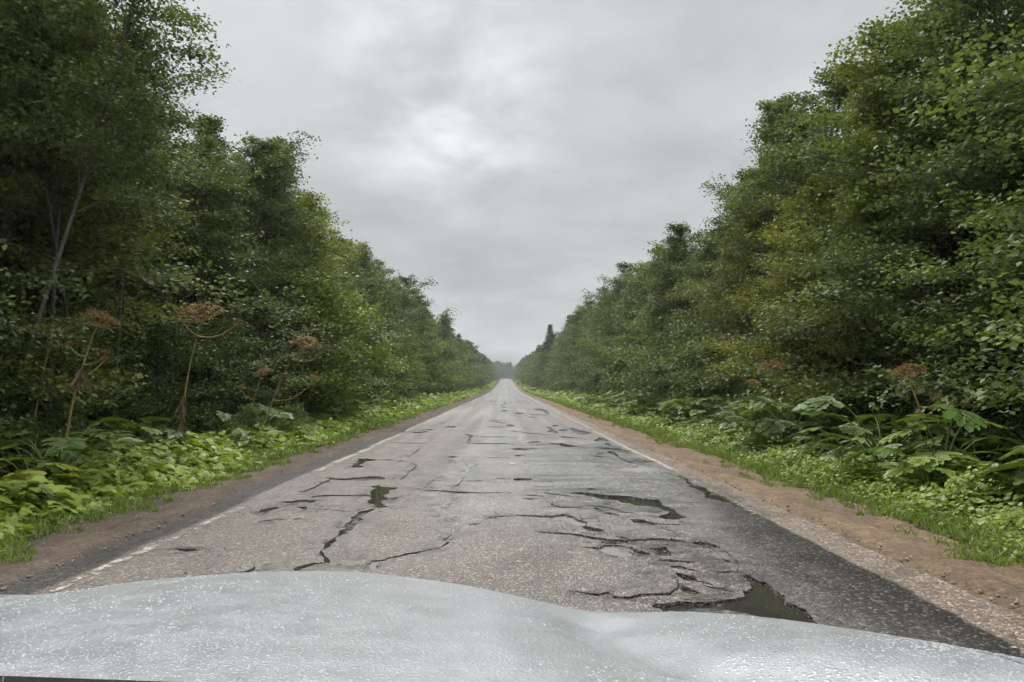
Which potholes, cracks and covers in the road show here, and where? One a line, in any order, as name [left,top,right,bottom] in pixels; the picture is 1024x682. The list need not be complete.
pothole [570,542,635,557]
crack [258,443,743,599]
pothole [367,485,398,508]
pothole [651,574,818,624]
pothole [569,492,686,520]
crack [466,414,545,458]
